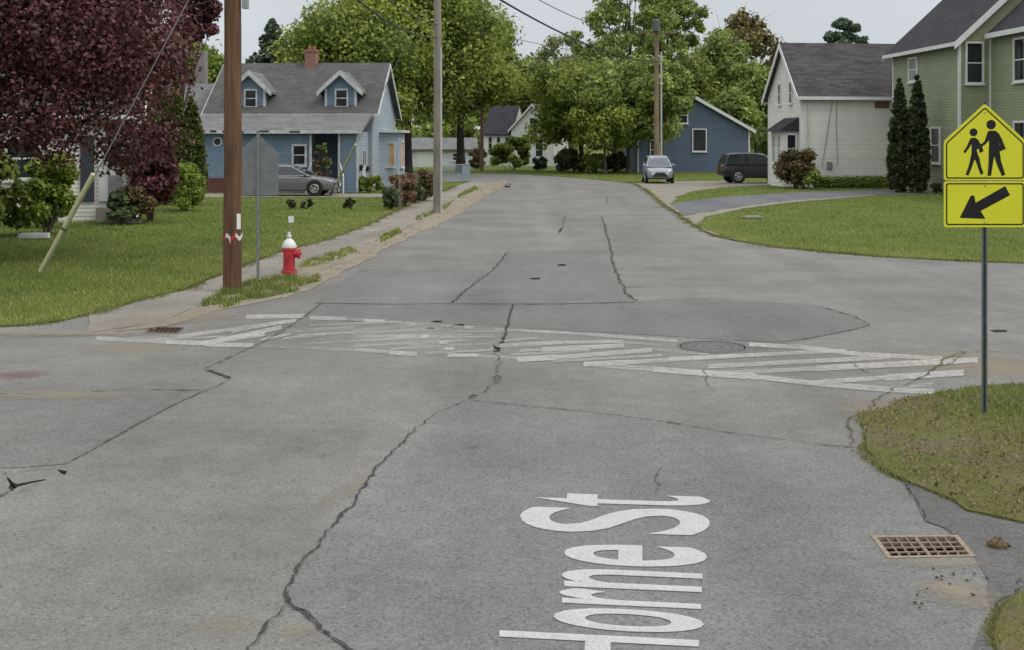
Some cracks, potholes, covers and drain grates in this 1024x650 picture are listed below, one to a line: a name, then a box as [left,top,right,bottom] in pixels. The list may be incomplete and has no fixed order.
crack [178,369,231,402]
manhole cover [676,340,750,353]
crack [451,254,507,303]
crack [246,304,514,650]
crack [601,196,645,301]
crack [846,352,965,445]
drain grate [871,535,976,559]
